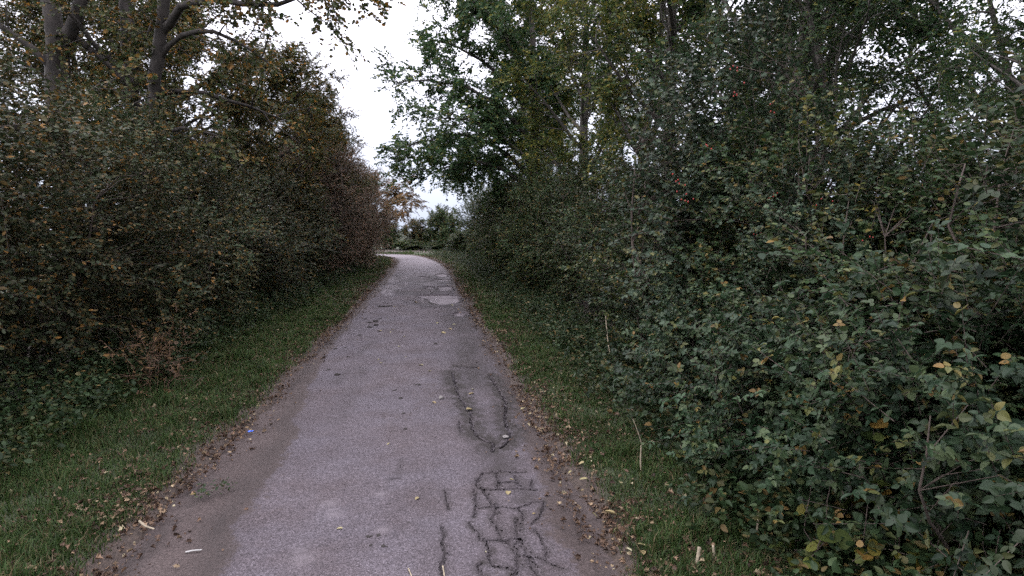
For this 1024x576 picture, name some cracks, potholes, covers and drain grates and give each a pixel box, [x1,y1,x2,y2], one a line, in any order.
crack [451,366,513,453]
crack [437,470,564,576]
